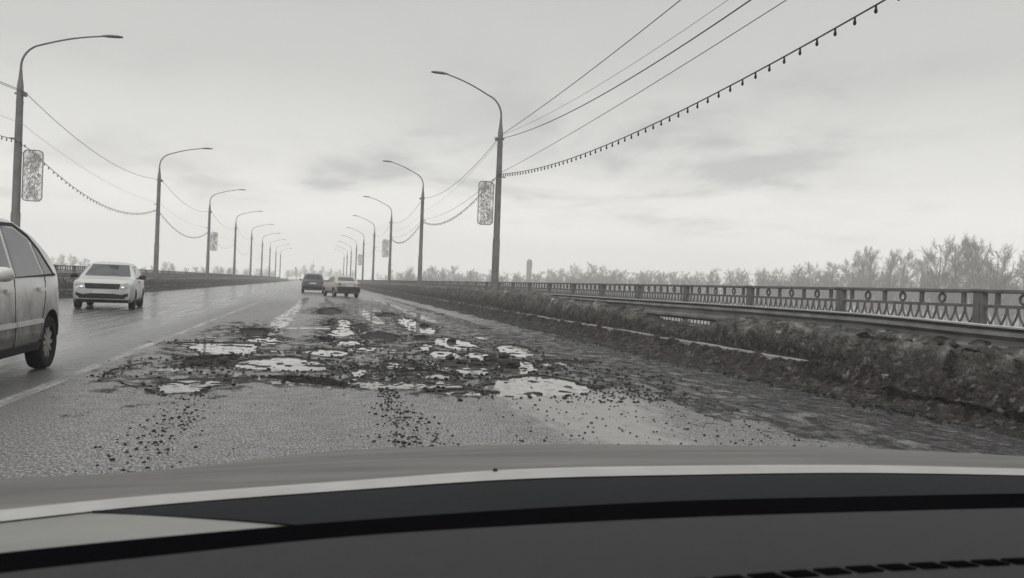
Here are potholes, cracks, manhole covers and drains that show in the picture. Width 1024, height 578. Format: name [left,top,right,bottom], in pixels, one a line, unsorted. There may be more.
pothole [482,374,593,398]
pothole [495,359,541,375]
pothole [174,342,263,354]
pothole [233,356,331,371]
pothole [429,337,483,349]
pothole [326,319,359,336]
pothole [154,377,258,393]
pothole [392,318,439,334]
pothole [350,323,369,332]
pothole [495,344,541,358]
